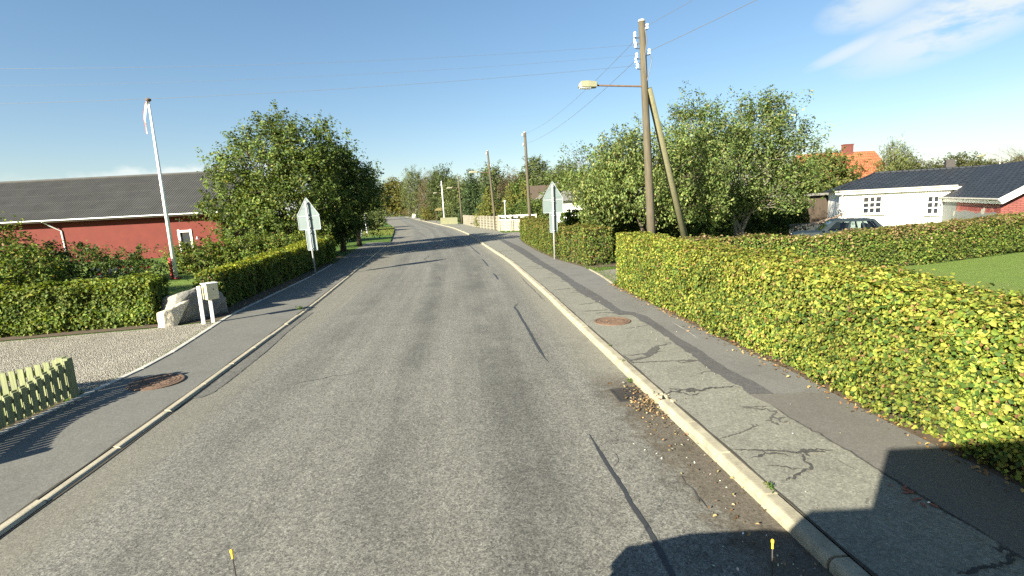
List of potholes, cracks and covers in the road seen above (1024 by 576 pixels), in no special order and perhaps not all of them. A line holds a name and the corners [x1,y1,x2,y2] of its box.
manhole cover [126,374,185,391]
manhole cover [594,317,631,326]
